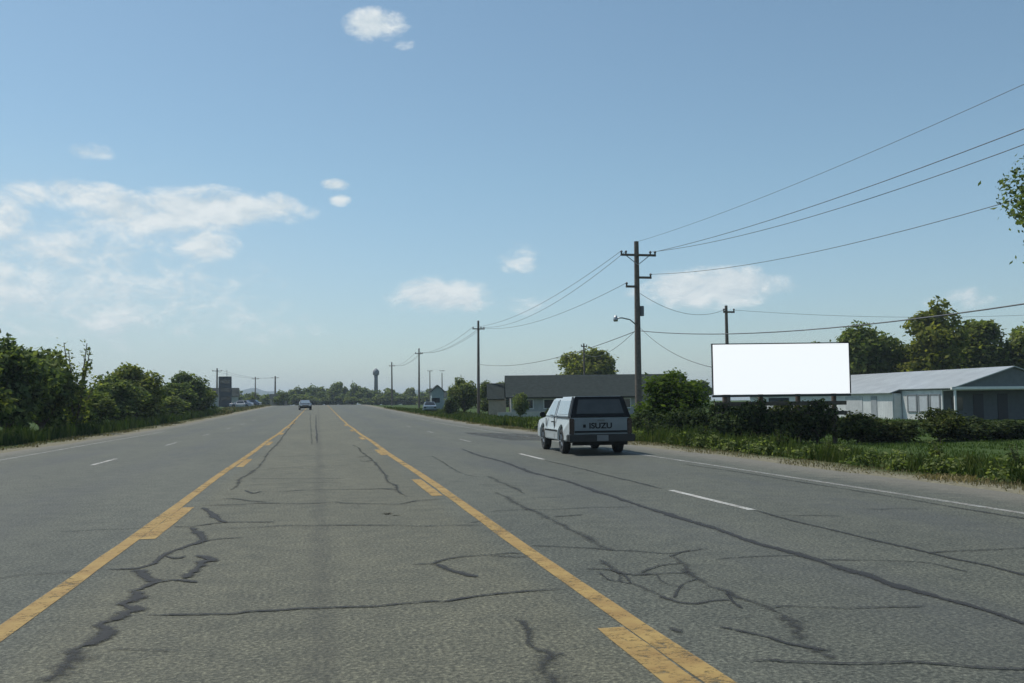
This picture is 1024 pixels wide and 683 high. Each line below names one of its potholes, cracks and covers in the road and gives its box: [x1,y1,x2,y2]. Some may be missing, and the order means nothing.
crack [39,425,1024,681]
